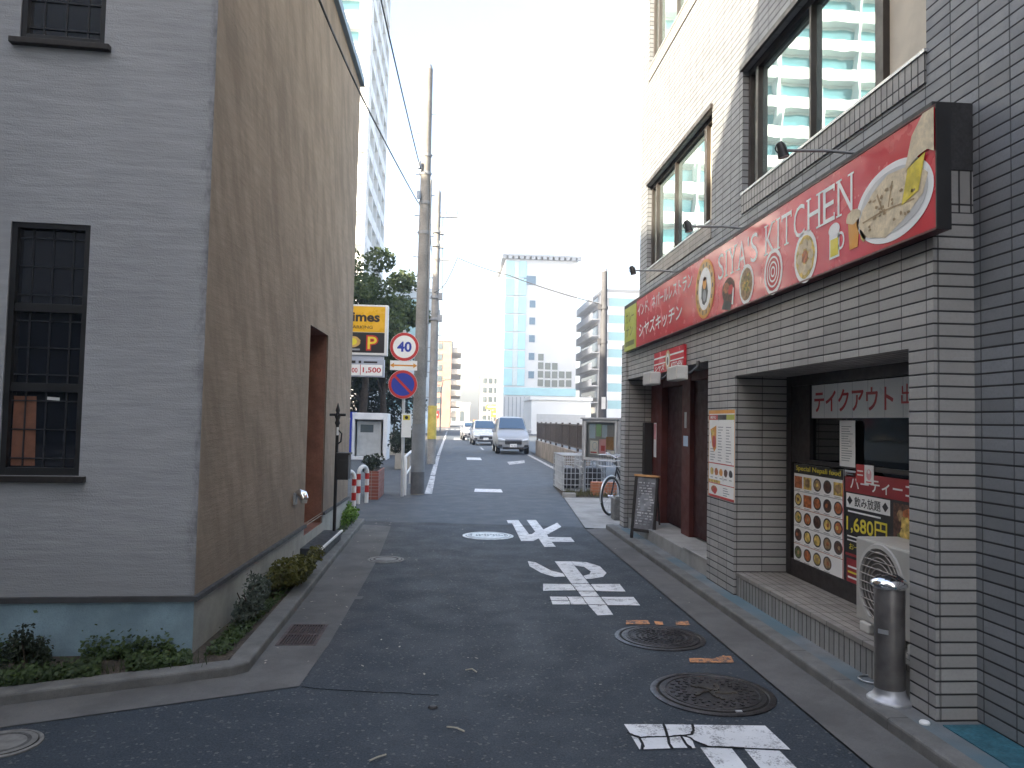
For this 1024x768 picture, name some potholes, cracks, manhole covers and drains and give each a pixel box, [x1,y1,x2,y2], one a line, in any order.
manhole cover [462,532,514,540]
manhole cover [615,625,706,651]
manhole cover [650,673,777,717]
manhole cover [0,729,44,758]
drain grate [275,624,328,646]
